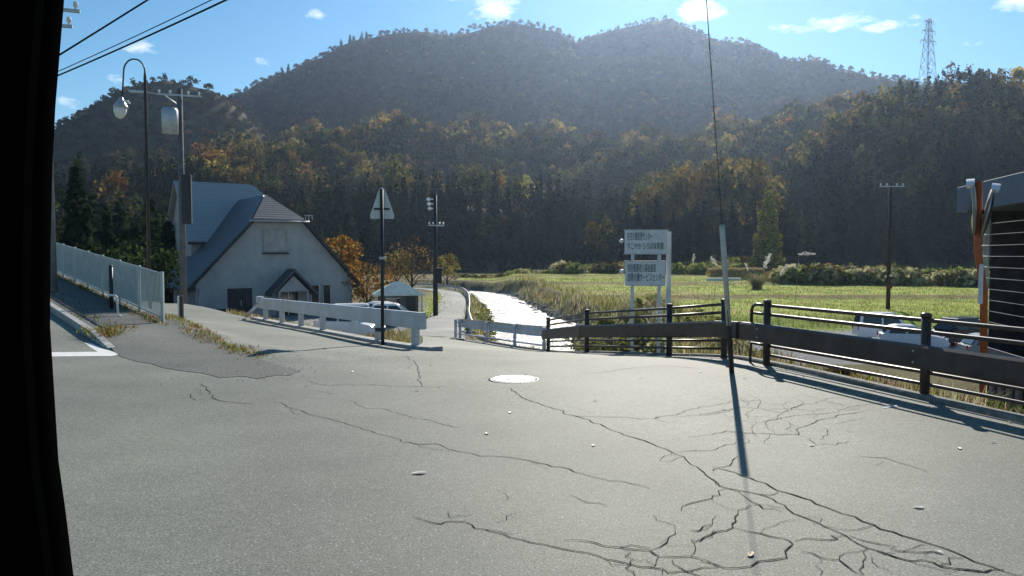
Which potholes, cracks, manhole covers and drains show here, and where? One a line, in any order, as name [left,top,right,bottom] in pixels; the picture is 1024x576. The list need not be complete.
crack [416,390,1020,576]
manhole cover [488,375,540,383]
crack [275,401,648,488]
